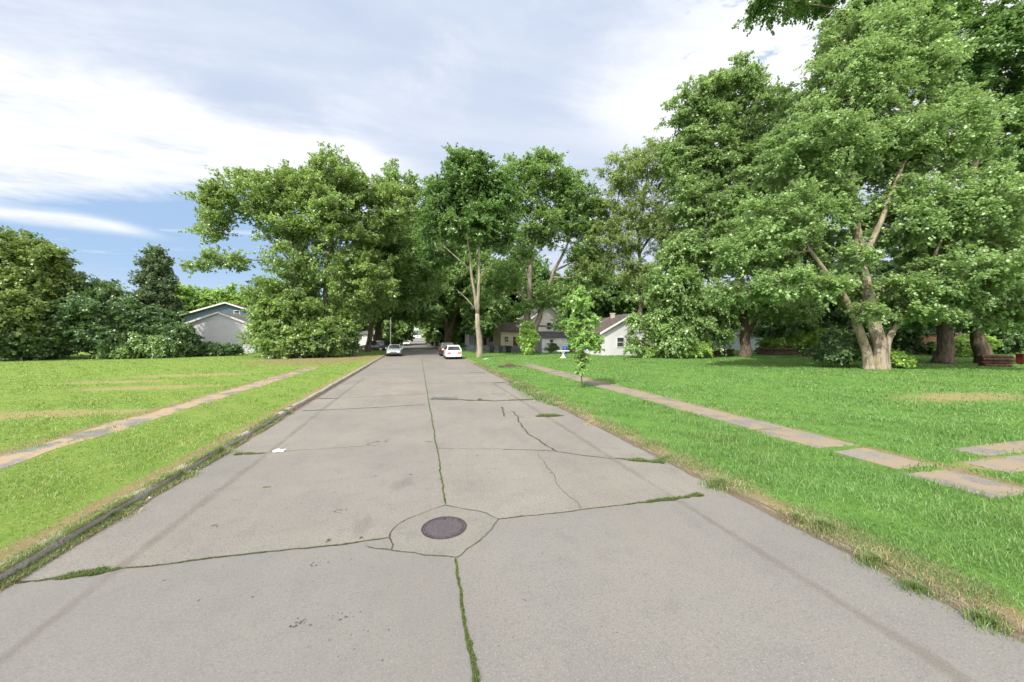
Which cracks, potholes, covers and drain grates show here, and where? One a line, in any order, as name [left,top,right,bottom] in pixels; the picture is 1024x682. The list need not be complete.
crack [432,372,666,508]
manhole cover [421,516,467,539]
